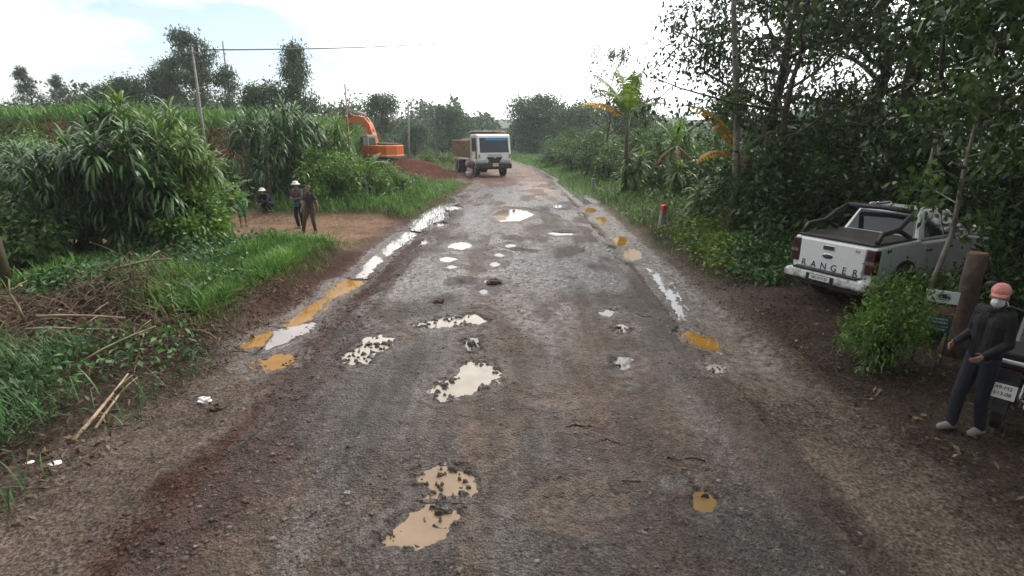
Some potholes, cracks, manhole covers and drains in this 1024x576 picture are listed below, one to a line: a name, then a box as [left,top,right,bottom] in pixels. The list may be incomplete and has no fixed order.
pothole [322,329,410,374]
pothole [612,247,653,263]
pothole [601,320,642,337]
pothole [605,235,638,247]
pothole [402,308,502,334]
pothole [598,350,650,373]
pothole [430,254,465,264]
pothole [673,324,735,358]
pothole [588,305,627,320]
pothole [355,496,478,570]
